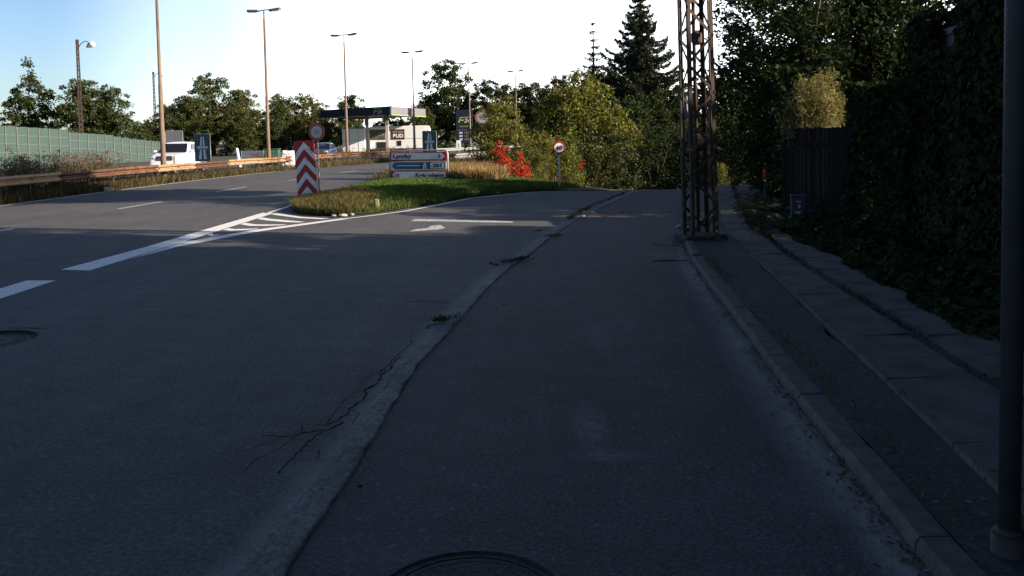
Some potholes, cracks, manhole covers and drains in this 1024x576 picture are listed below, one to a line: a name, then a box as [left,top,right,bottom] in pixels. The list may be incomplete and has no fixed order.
crack [235,340,413,475]
manhole cover [0,330,38,347]
manhole cover [390,551,555,576]
